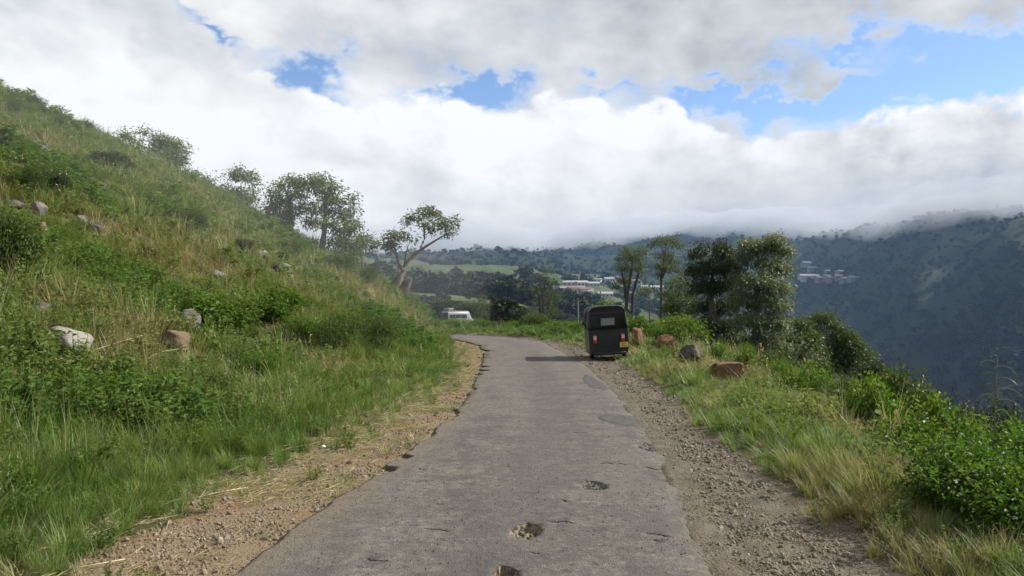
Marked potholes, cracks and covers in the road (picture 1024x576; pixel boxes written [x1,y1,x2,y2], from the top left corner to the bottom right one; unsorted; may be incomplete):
pothole [509,523,542,540]
pothole [491,566,518,576]
pothole [579,481,607,490]
